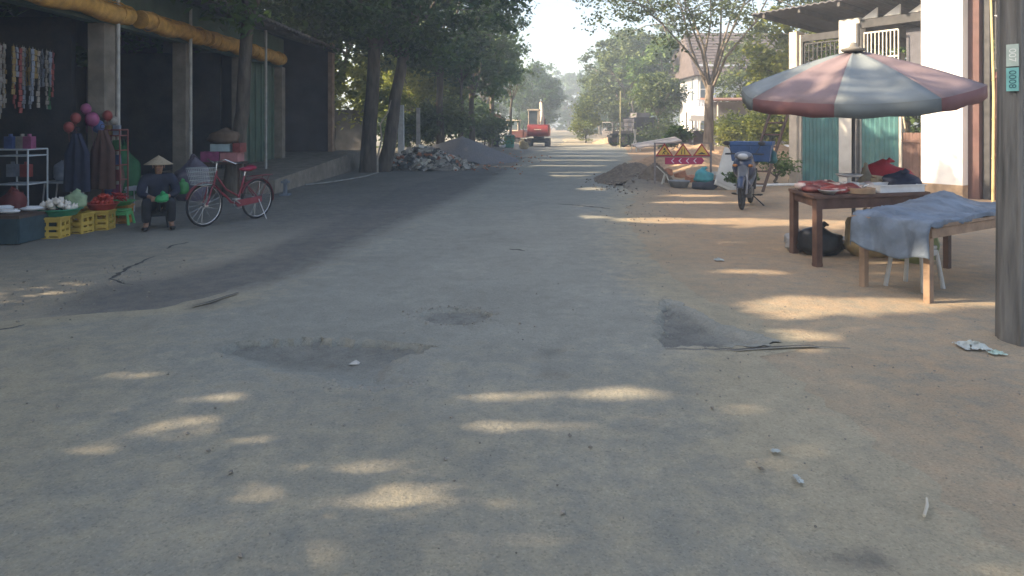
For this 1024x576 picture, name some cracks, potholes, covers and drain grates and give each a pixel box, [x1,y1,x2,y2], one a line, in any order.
pothole [646,298,780,352]
crack [107,242,189,285]
crack [193,292,239,307]
pothole [407,305,499,326]
